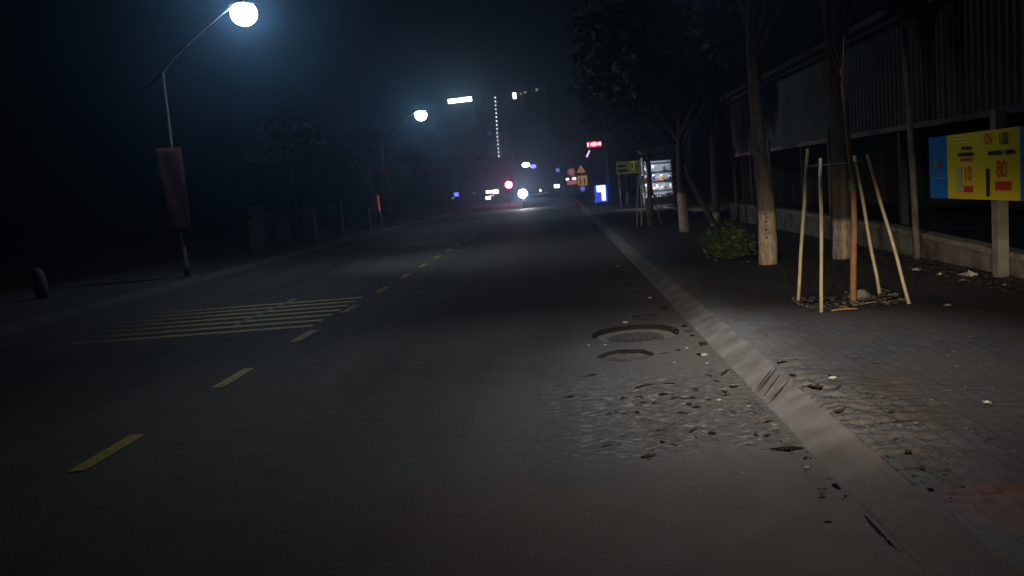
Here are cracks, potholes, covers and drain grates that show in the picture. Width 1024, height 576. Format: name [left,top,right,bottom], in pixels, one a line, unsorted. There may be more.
manhole cover [591,324,679,342]
